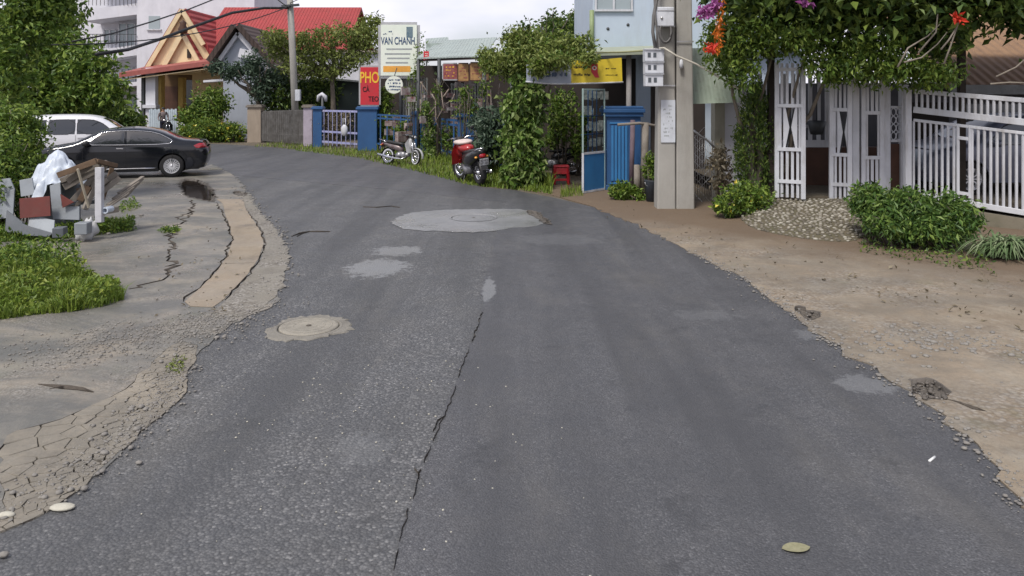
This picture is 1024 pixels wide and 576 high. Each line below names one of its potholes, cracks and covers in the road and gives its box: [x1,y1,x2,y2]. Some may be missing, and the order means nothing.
crack [129,200,266,301]
pothole [177,178,218,202]
crack [394,312,483,568]
pothole [908,377,952,400]
pothole [794,305,821,320]
crack [0,341,198,533]
manhole cover [265,314,355,342]
